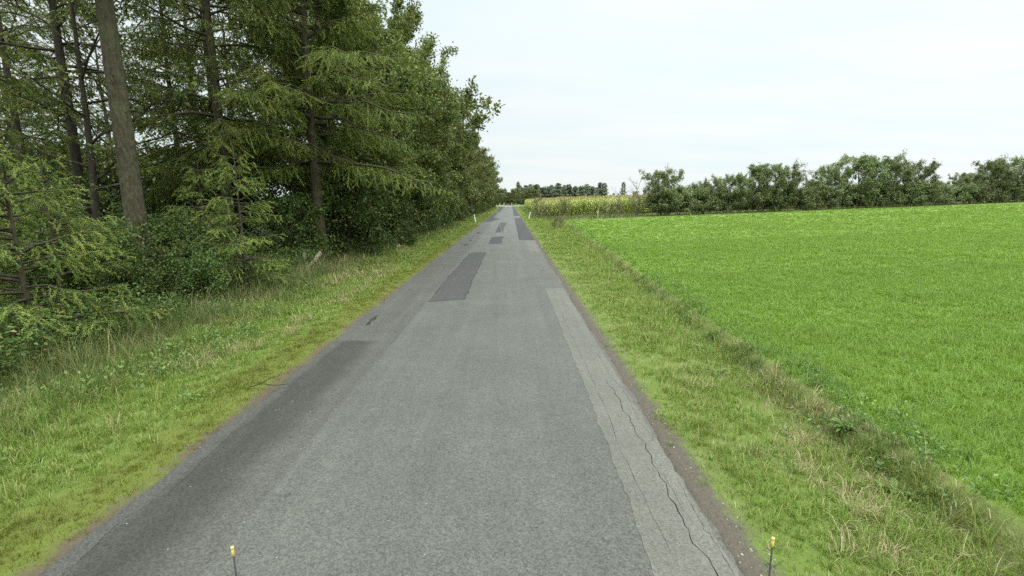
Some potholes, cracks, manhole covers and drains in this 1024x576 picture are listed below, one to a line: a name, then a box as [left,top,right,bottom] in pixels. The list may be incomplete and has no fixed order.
crack [555,298,733,576]
